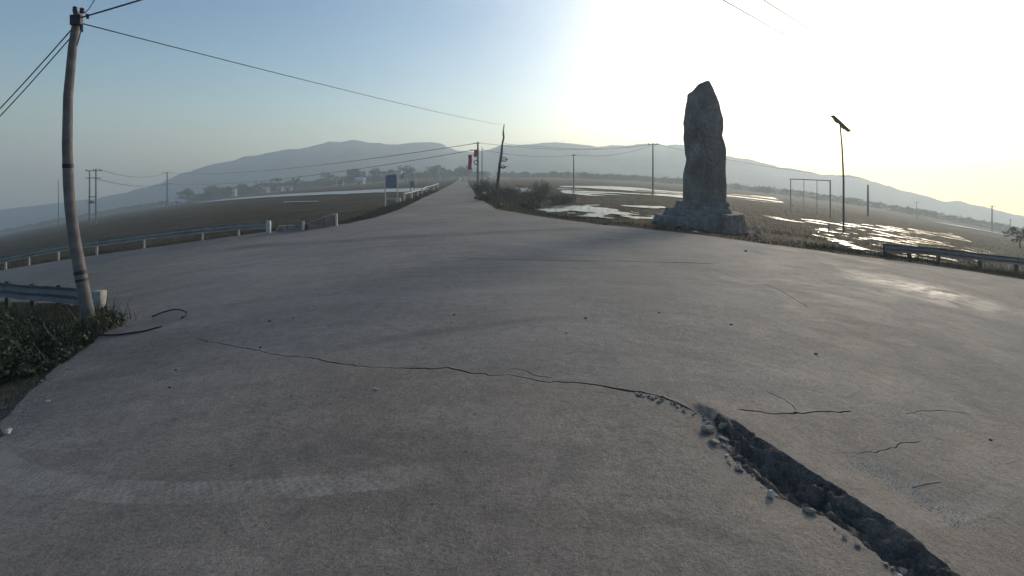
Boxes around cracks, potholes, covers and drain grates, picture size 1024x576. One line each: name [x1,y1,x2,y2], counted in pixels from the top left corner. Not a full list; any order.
pothole [713,413,961,576]
crack [737,393,851,414]
crack [198,339,693,411]
